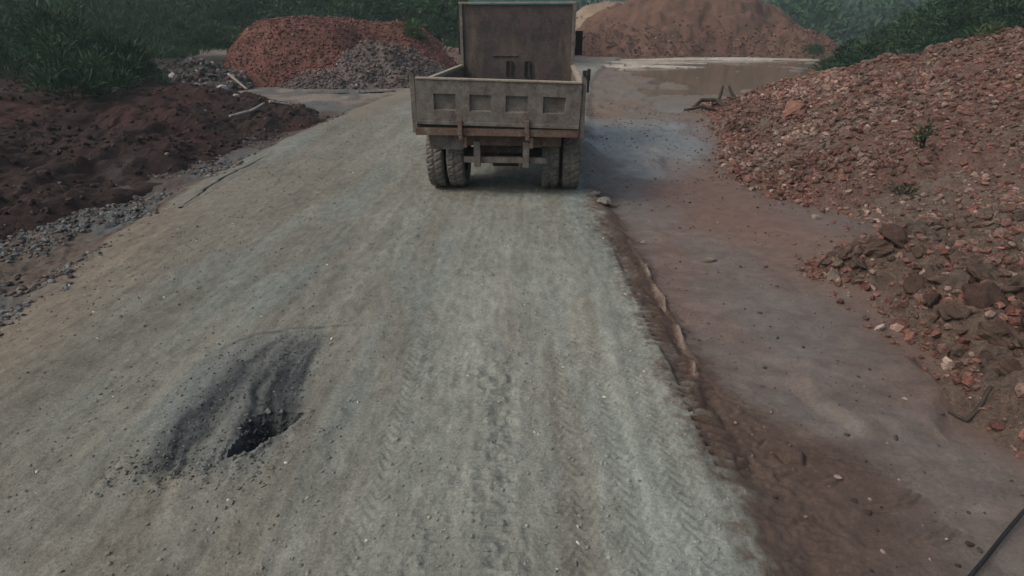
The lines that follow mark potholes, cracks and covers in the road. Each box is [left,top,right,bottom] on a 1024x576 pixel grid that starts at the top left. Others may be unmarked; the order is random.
pothole [214,403,316,467]
crack [176,152,274,208]
